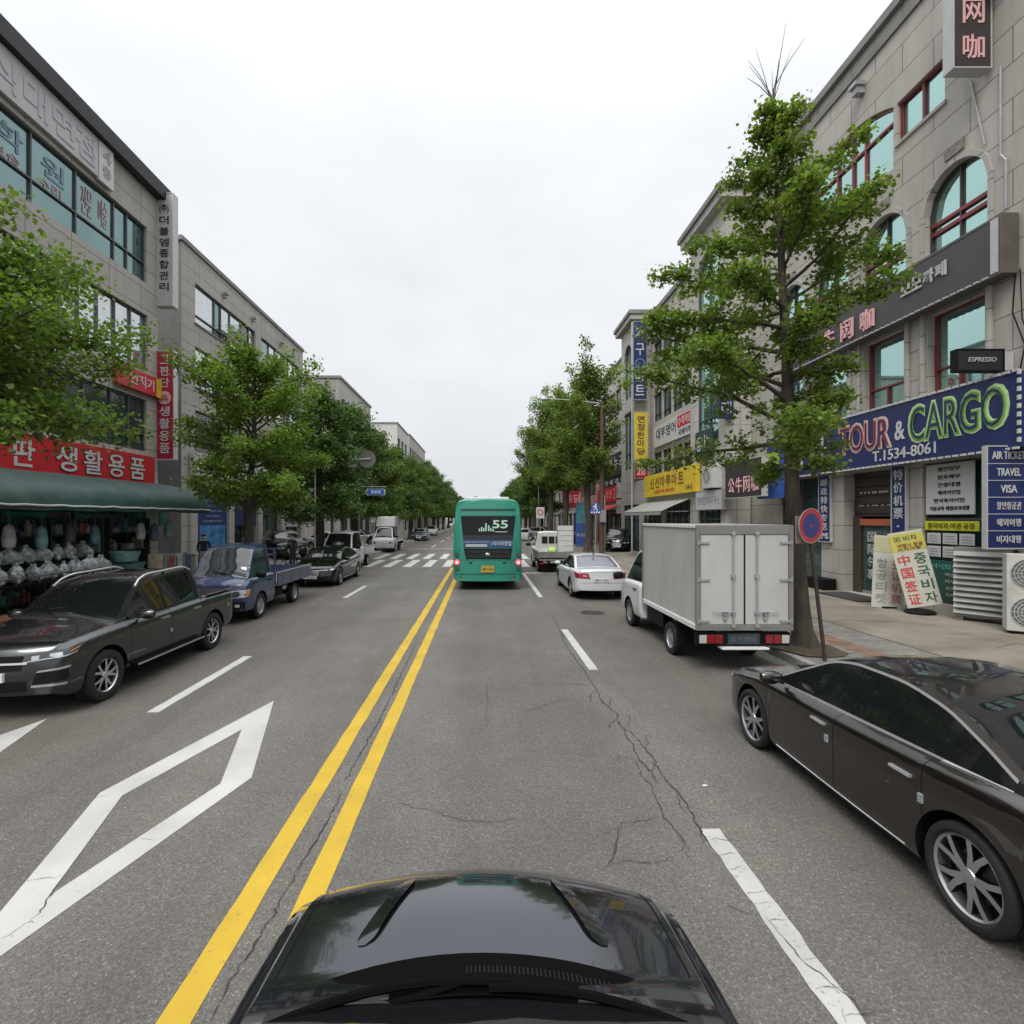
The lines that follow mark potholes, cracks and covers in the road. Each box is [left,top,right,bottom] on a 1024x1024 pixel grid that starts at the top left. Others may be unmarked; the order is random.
crack [0,876,60,939]
crack [391,776,516,822]
crack [485,619,893,1019]
